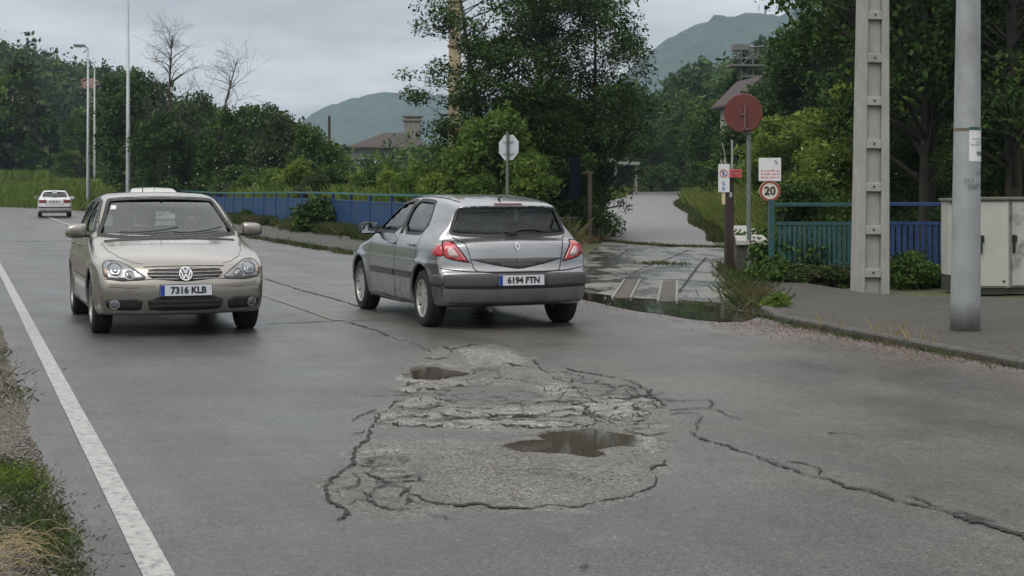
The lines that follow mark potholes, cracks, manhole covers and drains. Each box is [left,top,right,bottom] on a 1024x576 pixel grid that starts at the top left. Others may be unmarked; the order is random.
pothole [397,364,476,381]
pothole [491,426,643,458]
crack [323,359,1024,538]
